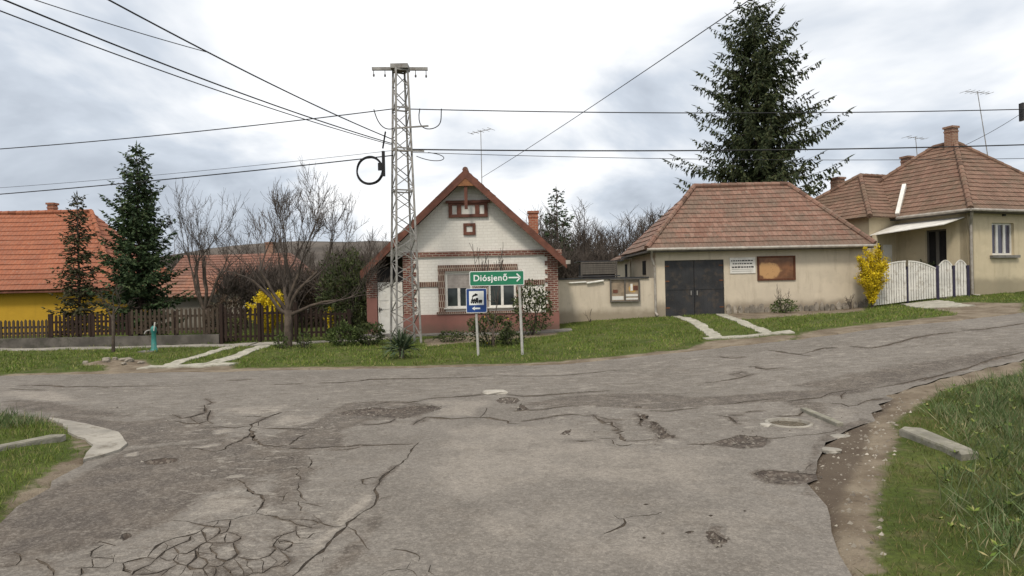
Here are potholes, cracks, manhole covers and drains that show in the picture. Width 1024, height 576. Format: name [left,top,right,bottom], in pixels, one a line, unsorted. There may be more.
pothole [714,435,768,449]
pothole [754,471,818,485]
crack [376,393,644,446]
crack [725,333,1023,423]
pothole [649,422,675,439]
manhole cover [765,417,814,428]
pothole [706,532,727,548]
crack [80,399,406,576]
